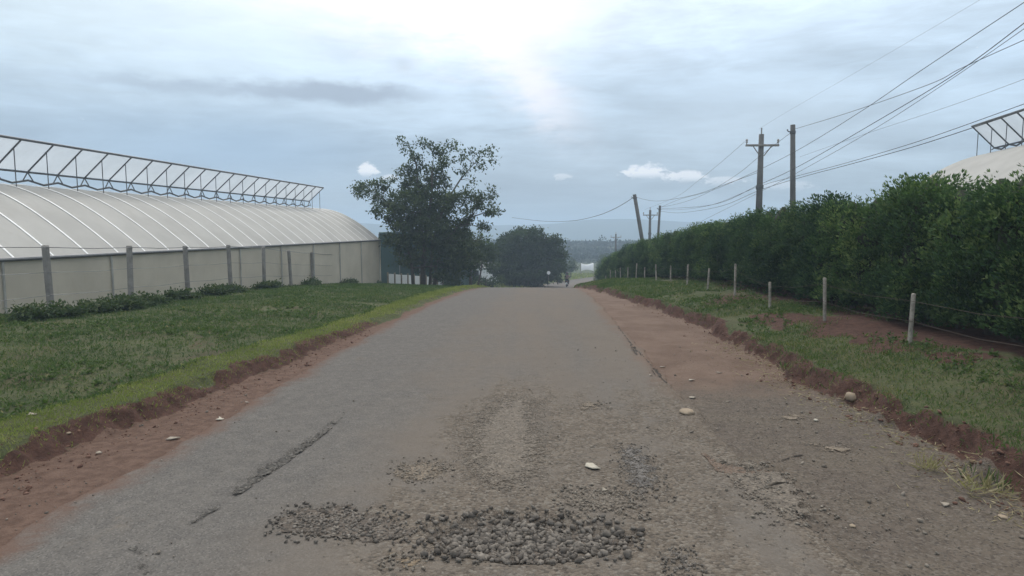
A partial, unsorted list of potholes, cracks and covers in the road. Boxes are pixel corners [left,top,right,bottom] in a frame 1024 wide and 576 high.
pothole [263,501,423,545]
pothole [412,504,645,566]
crack [189,412,344,525]
pothole [377,457,455,485]
